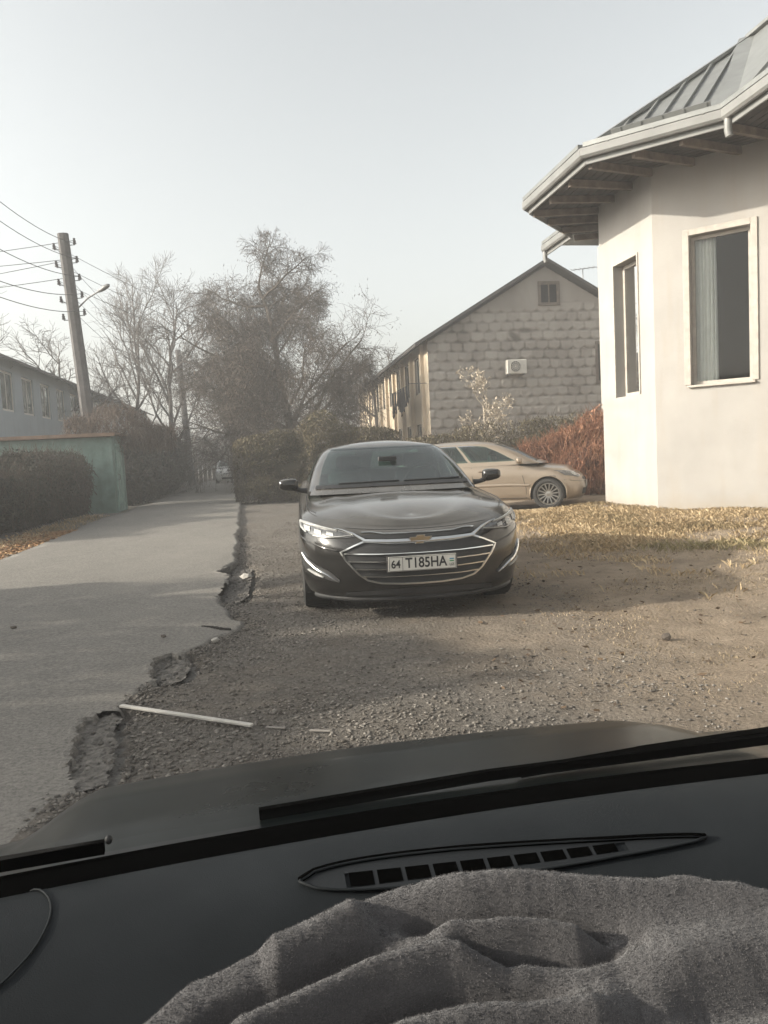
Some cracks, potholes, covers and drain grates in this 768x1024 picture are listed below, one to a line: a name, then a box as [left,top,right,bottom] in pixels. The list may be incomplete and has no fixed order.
pothole [143,651,197,687]
pothole [214,567,255,605]
pothole [58,712,129,794]
